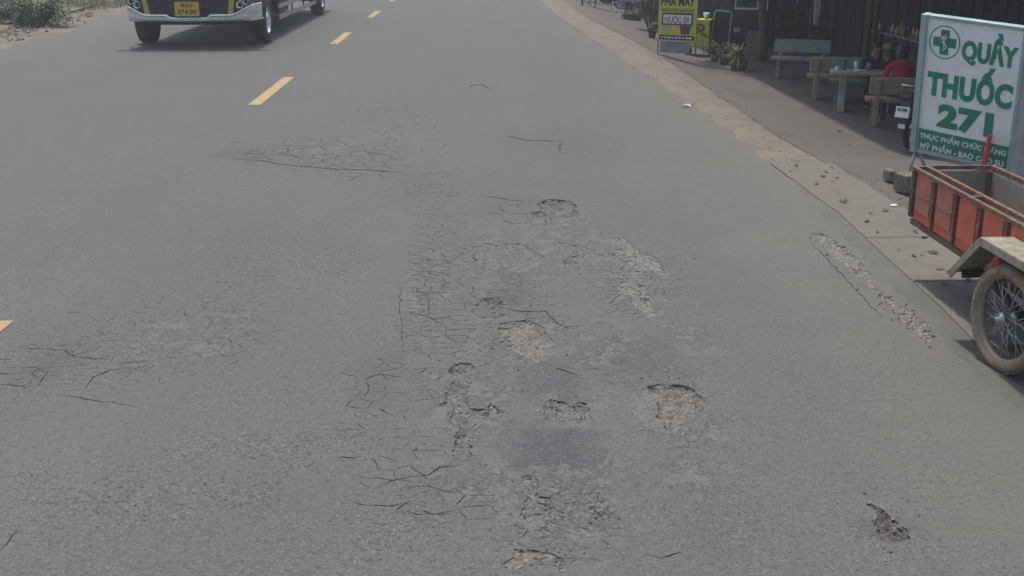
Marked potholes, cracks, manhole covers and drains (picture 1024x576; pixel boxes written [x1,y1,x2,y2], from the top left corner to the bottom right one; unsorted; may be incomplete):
pothole [811,233,941,343]
pothole [531,199,579,219]
pothole [503,549,569,575]
crack [395,171,481,358]
pothole [543,399,592,424]
pothole [866,503,910,543]
pothole [442,363,504,459]
crack [336,359,506,523]
crack [210,104,444,181]
pothole [617,281,659,318]
pothole [497,319,555,365]
